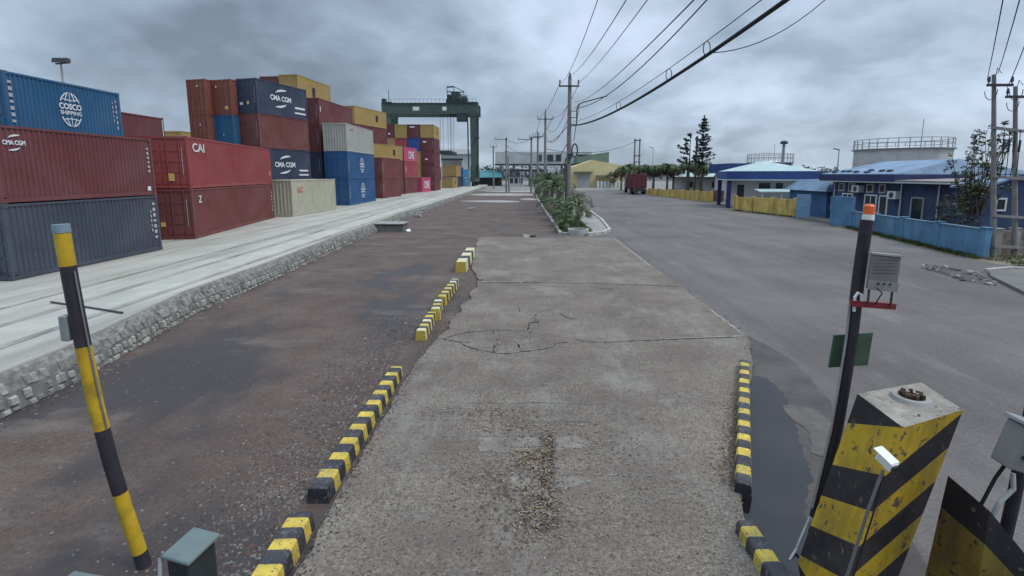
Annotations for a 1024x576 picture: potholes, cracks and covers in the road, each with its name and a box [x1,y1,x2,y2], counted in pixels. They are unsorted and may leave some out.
crack [441,307,574,354]
